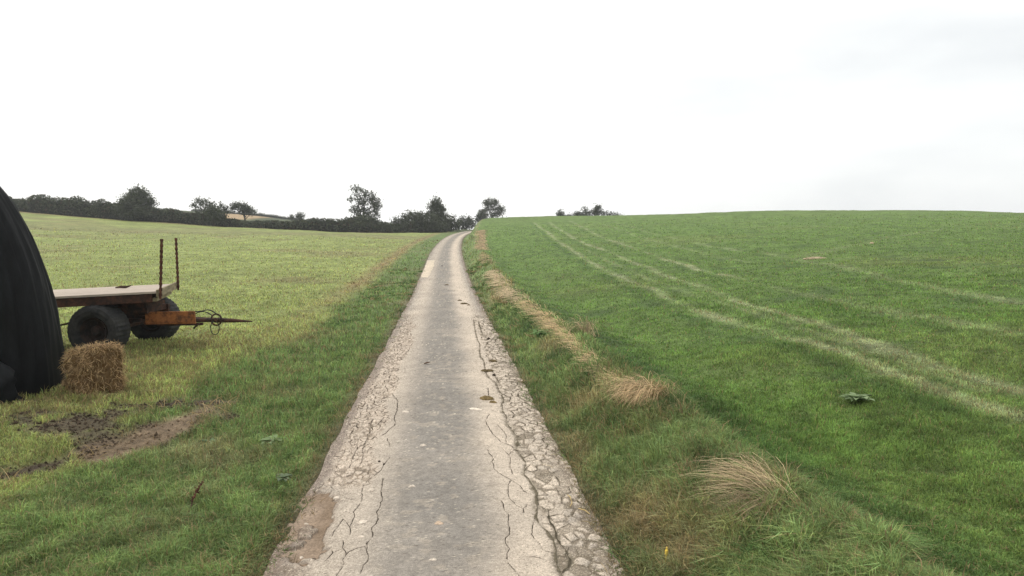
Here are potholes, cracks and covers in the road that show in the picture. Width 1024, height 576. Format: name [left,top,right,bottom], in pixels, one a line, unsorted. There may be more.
pothole [279,493,337,567]
crack [473,315,610,576]
crack [320,314,416,576]
